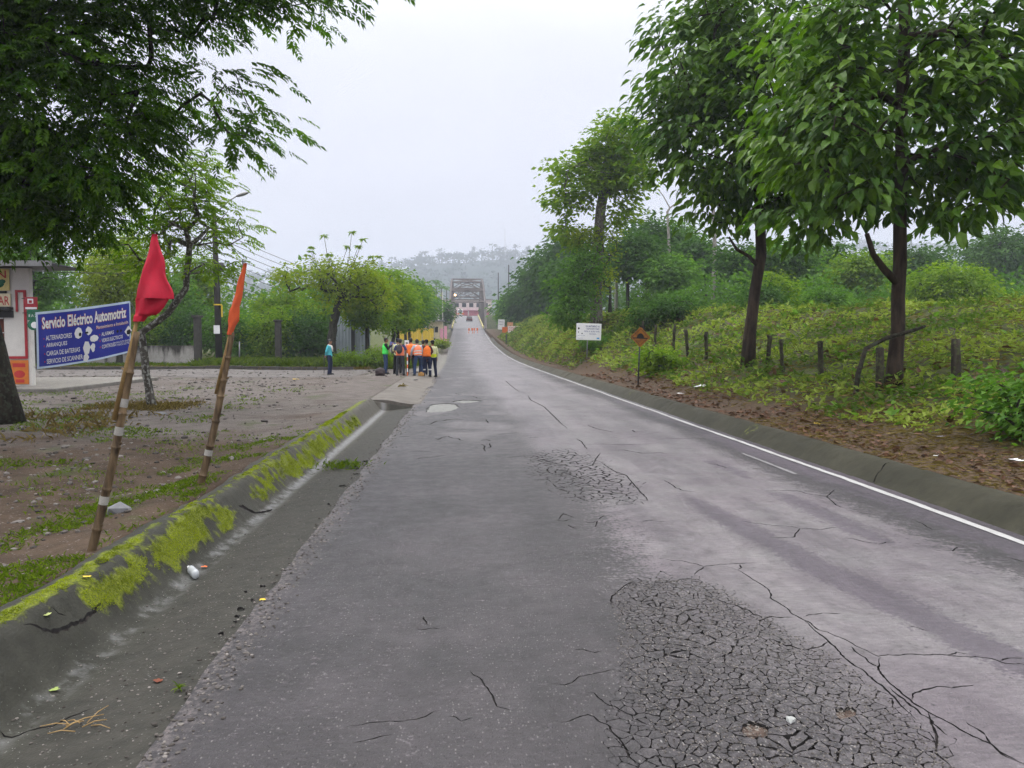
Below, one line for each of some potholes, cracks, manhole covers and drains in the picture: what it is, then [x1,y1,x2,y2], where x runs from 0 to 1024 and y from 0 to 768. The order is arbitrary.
crack [506,381,704,505]
crack [353,671,512,742]
crack [24,602,101,634]
crack [559,558,1024,768]
